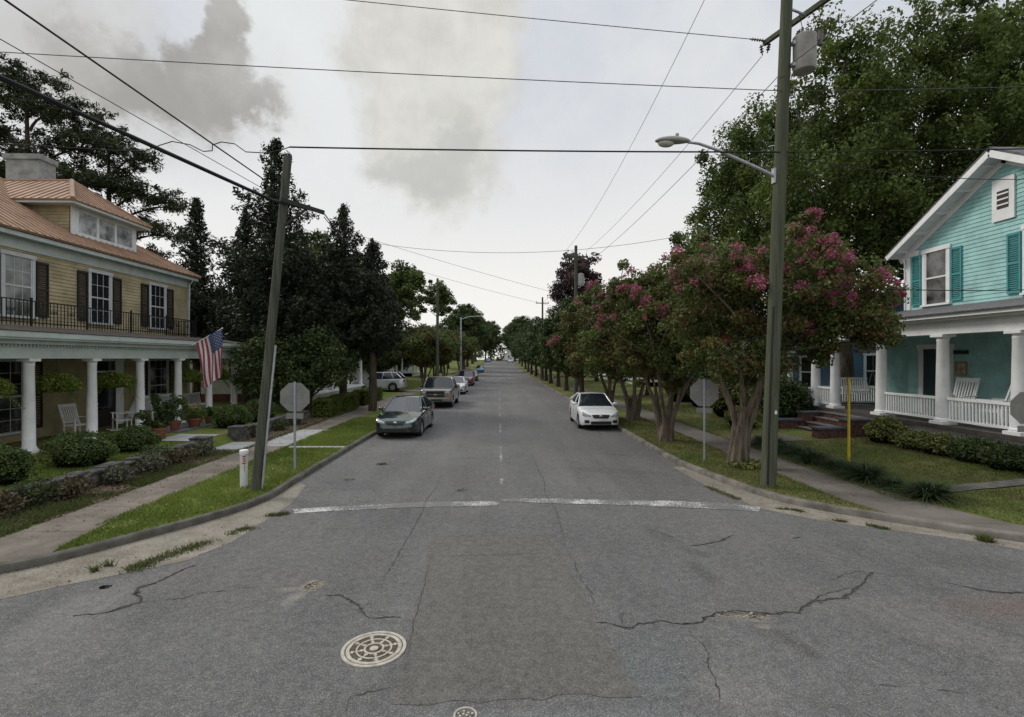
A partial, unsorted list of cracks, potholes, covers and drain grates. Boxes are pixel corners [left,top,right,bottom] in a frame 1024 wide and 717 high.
crack [597,571,890,707]
pothole [301,579,325,592]
crack [943,581,1024,594]
crack [326,594,396,618]
crack [73,564,262,616]
manhole cover [341,631,406,668]
pothole [716,610,772,620]
